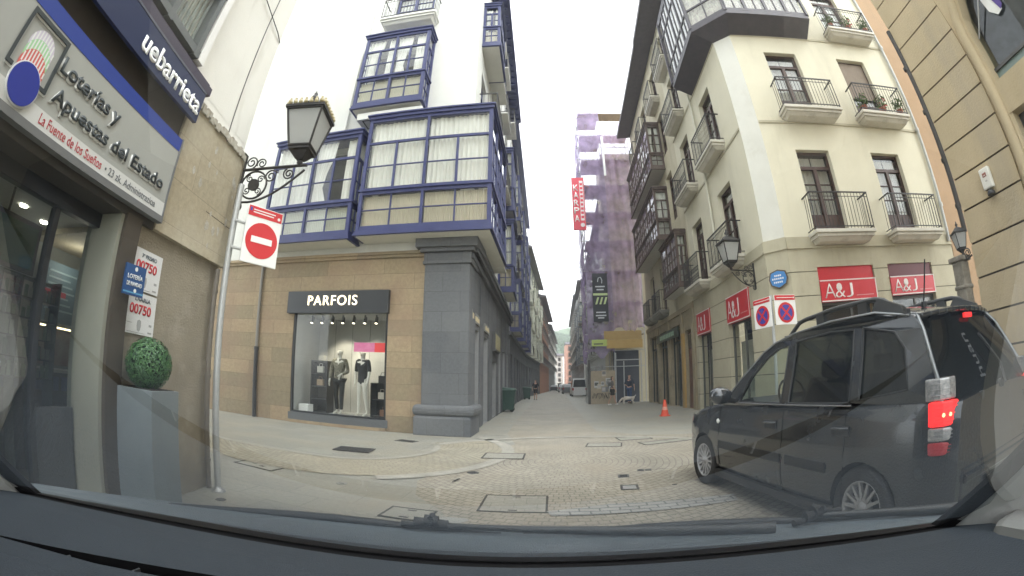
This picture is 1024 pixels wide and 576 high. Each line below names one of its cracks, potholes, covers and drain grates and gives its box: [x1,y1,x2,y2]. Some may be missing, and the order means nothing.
manhole cover [476,494,548,513]
